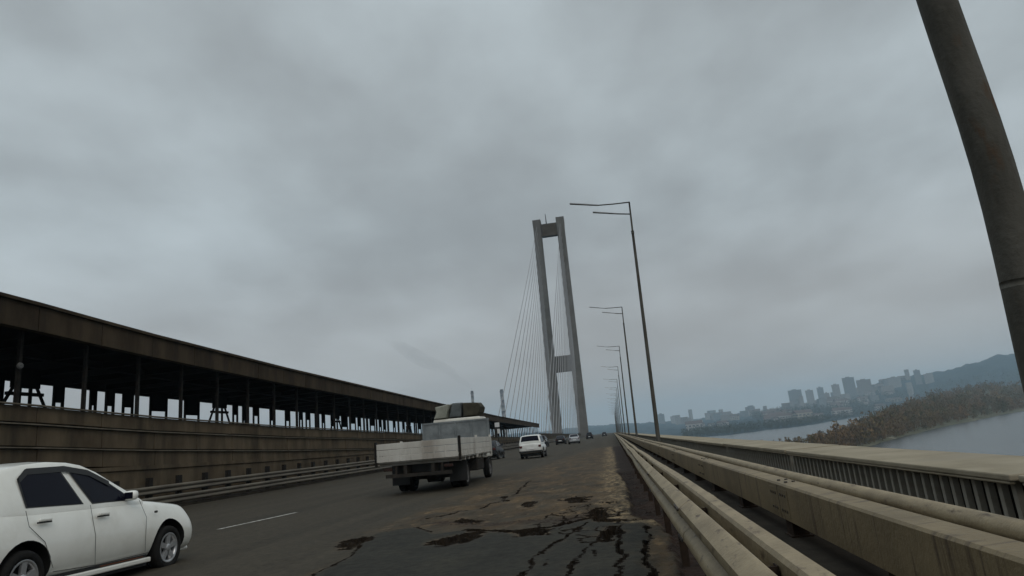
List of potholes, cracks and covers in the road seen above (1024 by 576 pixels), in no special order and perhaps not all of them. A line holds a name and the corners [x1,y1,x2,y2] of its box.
pothole [513,528,556,537]
pothole [583,507,615,522]
pothole [423,531,487,547]
pothole [596,525,626,542]
pothole [335,536,375,550]
crack [311,481,660,576]
